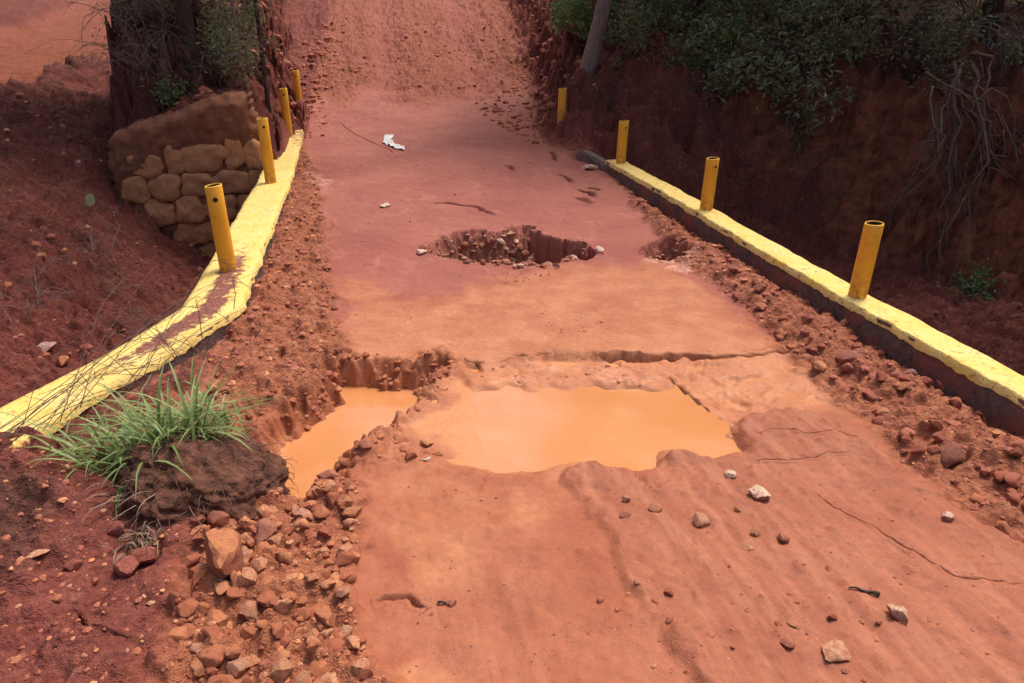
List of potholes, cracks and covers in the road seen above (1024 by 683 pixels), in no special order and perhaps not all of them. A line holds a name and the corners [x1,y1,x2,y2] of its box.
pothole [259,345,458,499]
crack [813,493,1024,587]
pothole [378,354,749,474]
crack [460,339,822,439]
crack [757,427,858,464]
crack [429,201,499,216]
pothole [419,222,604,269]
pothole [634,233,696,264]
